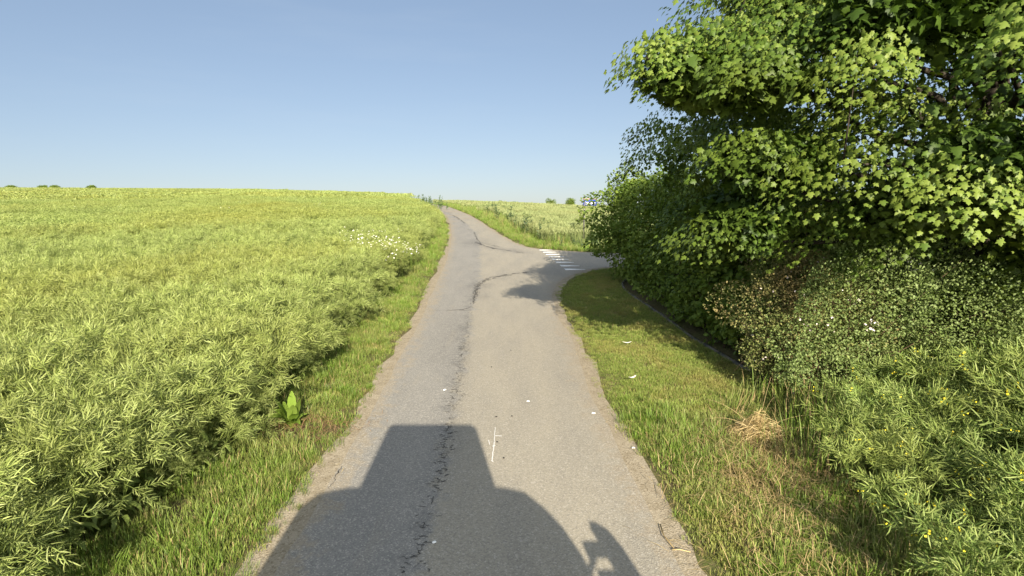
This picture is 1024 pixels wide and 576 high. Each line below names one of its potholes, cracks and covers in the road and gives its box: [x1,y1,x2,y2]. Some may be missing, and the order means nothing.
crack [433,272,527,311]
crack [399,309,474,573]
